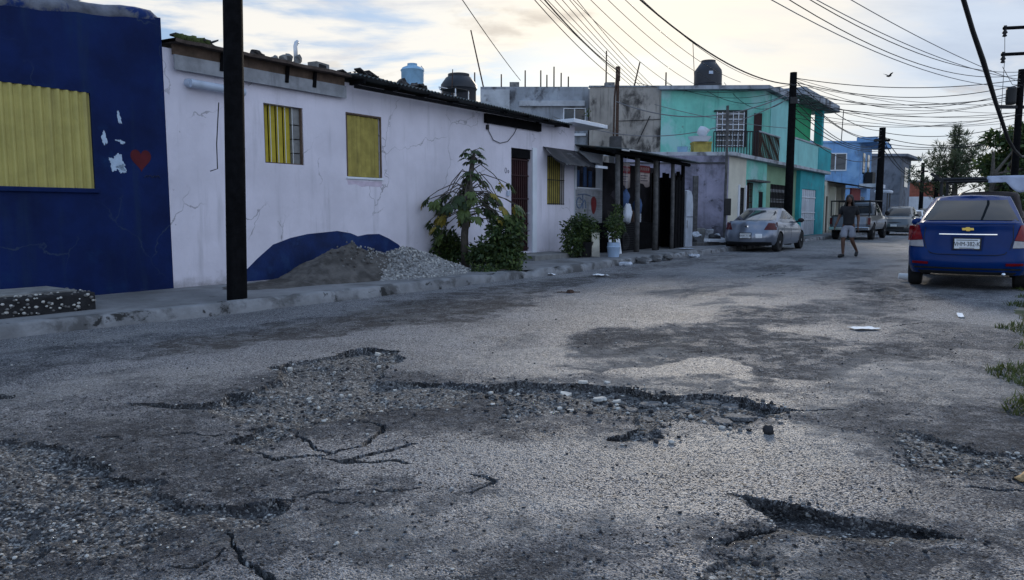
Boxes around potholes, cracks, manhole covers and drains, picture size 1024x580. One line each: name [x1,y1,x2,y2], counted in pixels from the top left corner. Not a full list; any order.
crack [297,487,421,506]
crack [256,422,416,464]
crack [171,531,277,580]
crack [466,473,497,493]
pothole [207,347,488,454]
pothole [890,429,1024,475]
pothole [711,493,965,549]
pothole [482,380,799,442]
